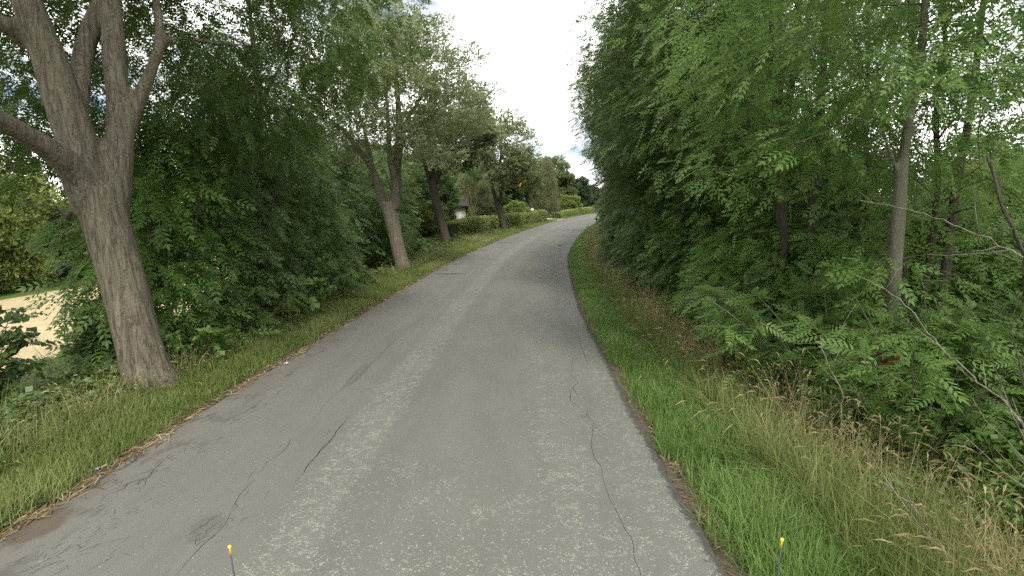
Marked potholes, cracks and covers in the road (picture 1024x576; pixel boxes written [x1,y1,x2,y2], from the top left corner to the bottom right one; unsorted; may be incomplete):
crack [570,335,641,576]
crack [177,319,421,574]
crack [18,386,292,574]
